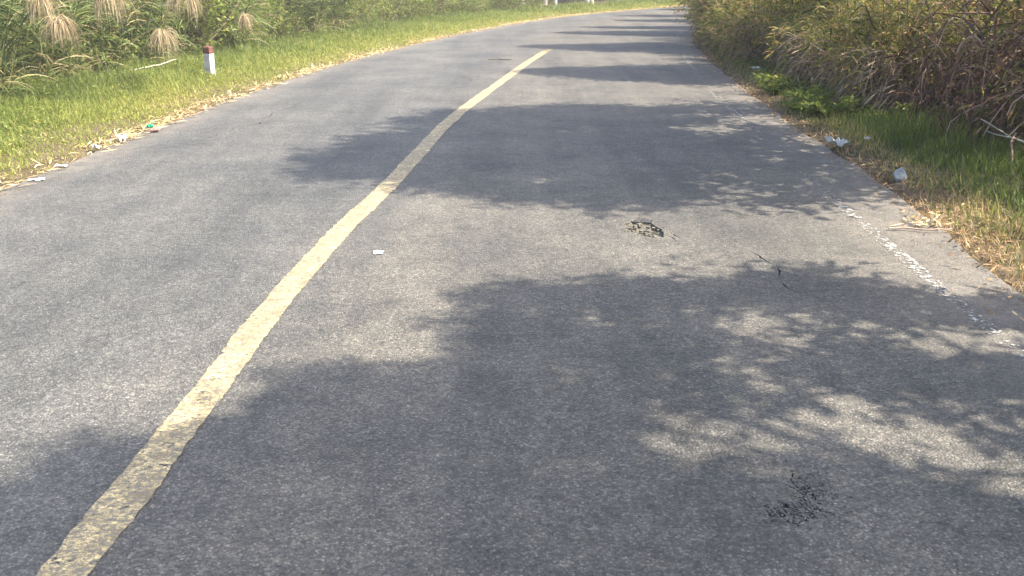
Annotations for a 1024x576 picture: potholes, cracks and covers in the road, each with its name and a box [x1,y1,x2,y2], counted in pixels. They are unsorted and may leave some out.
pothole [622,219,665,239]
